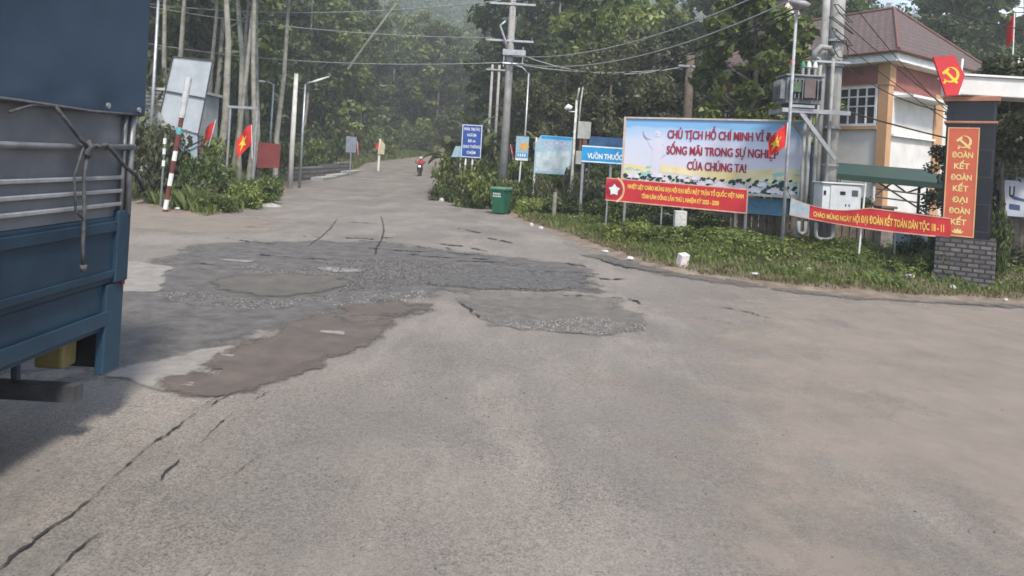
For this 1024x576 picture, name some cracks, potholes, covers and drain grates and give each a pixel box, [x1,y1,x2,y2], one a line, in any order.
pothole [456,290,648,335]
crack [0,392,233,576]
crack [227,217,511,263]
